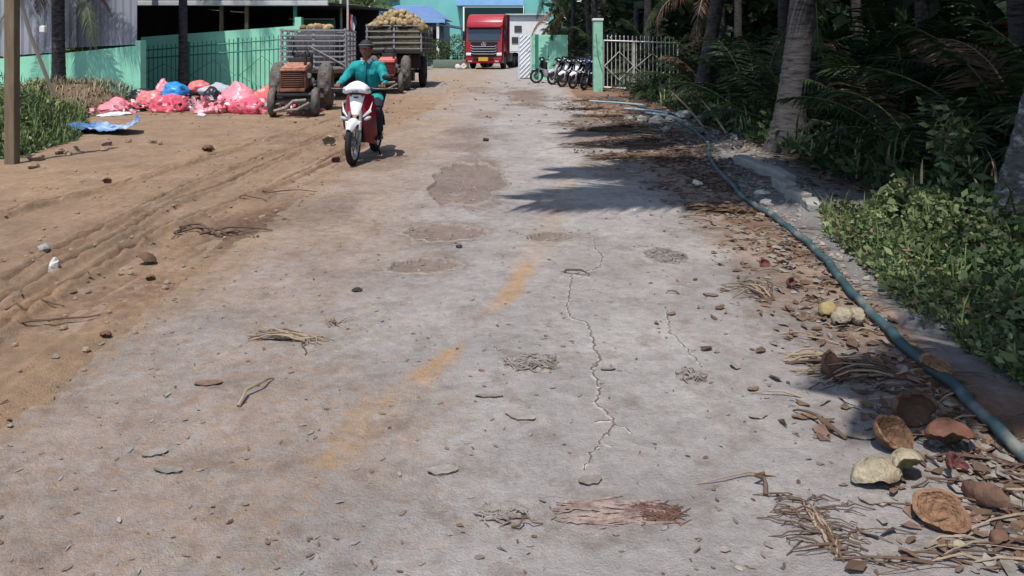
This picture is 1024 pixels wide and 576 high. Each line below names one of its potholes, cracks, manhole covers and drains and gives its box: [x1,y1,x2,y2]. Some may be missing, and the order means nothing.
crack [663,306,702,367]
pothole [520,231,580,243]
pothole [399,222,495,243]
pothole [382,257,470,275]
crack [562,238,632,469]
pothole [422,160,512,208]
